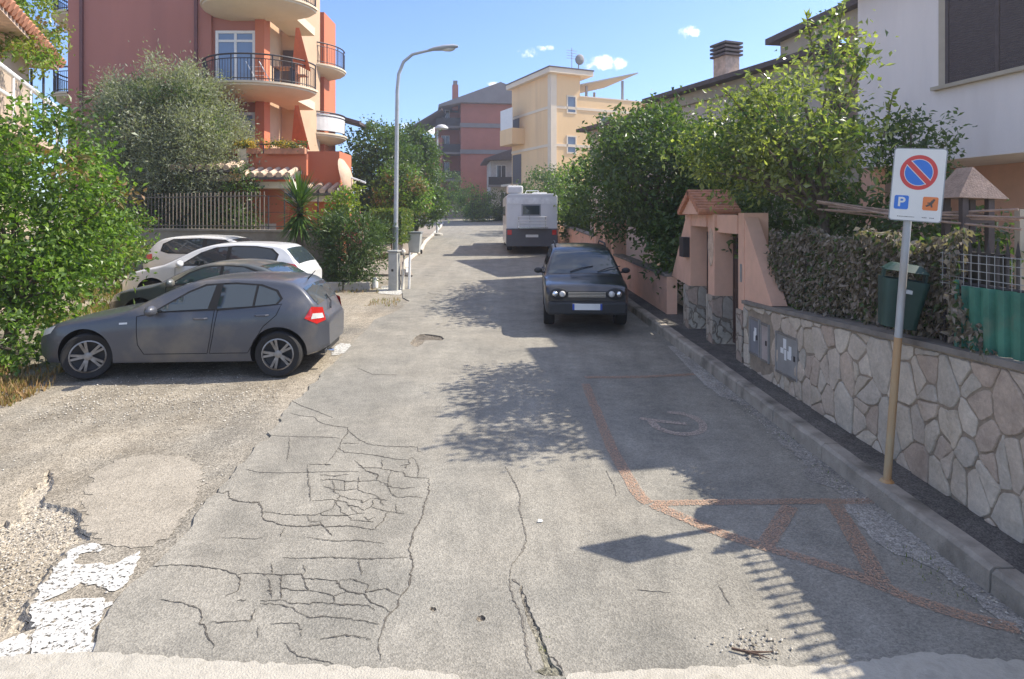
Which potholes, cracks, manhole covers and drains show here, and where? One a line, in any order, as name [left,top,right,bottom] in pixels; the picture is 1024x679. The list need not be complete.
crack [507,469,563,676]
pothole [410,334,444,347]
pothole [0,469,92,642]
crack [161,400,430,664]
